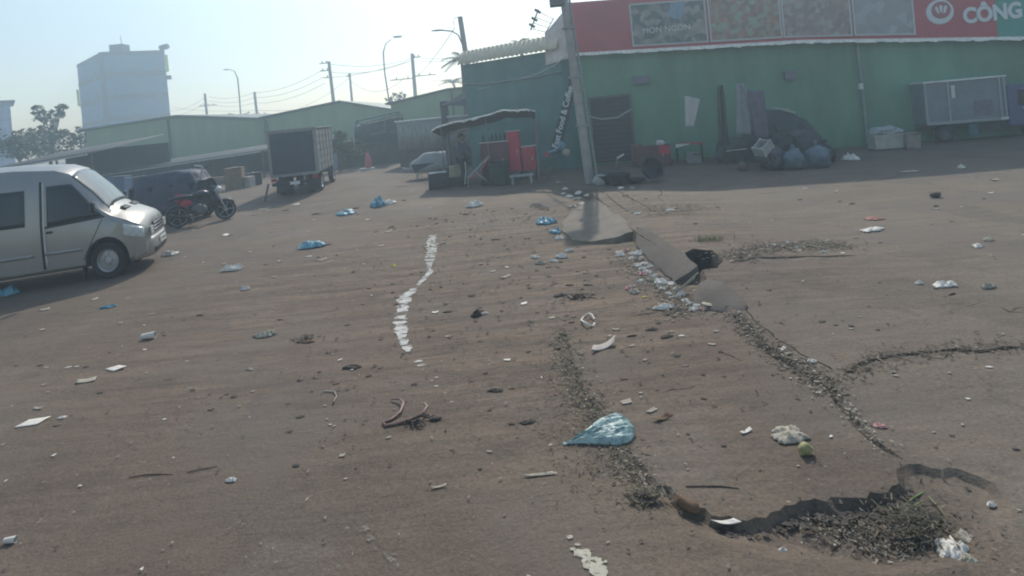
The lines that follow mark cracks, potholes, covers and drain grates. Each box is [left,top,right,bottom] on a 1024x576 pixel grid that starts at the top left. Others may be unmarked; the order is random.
pothole [619,445,1022,575]
pothole [680,249,723,287]
crack [593,188,699,215]
crack [666,309,1020,461]
